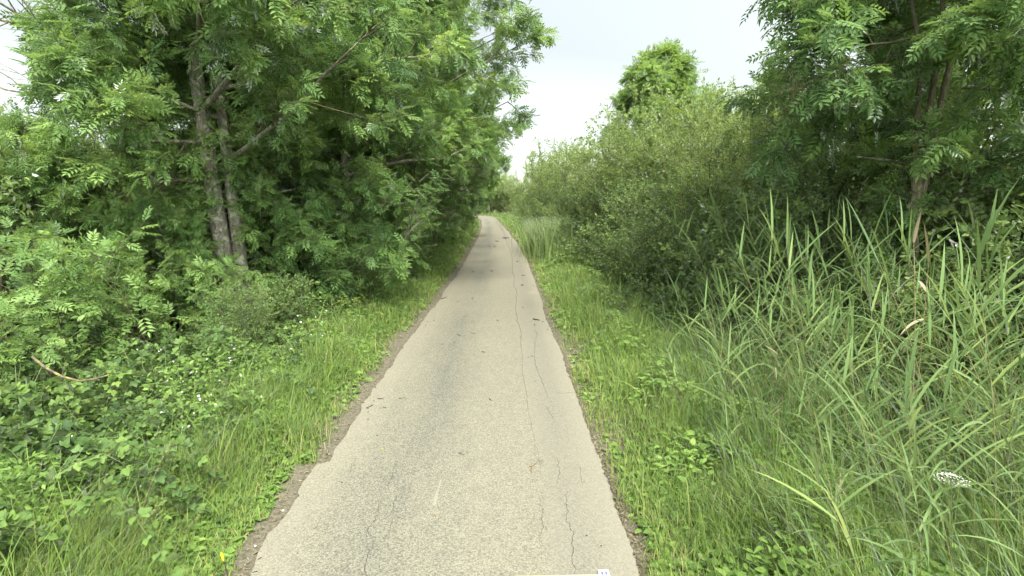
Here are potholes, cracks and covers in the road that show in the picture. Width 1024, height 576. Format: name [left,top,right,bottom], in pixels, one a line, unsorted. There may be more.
crack [364,463,397,576]
crack [557,460,583,573]
